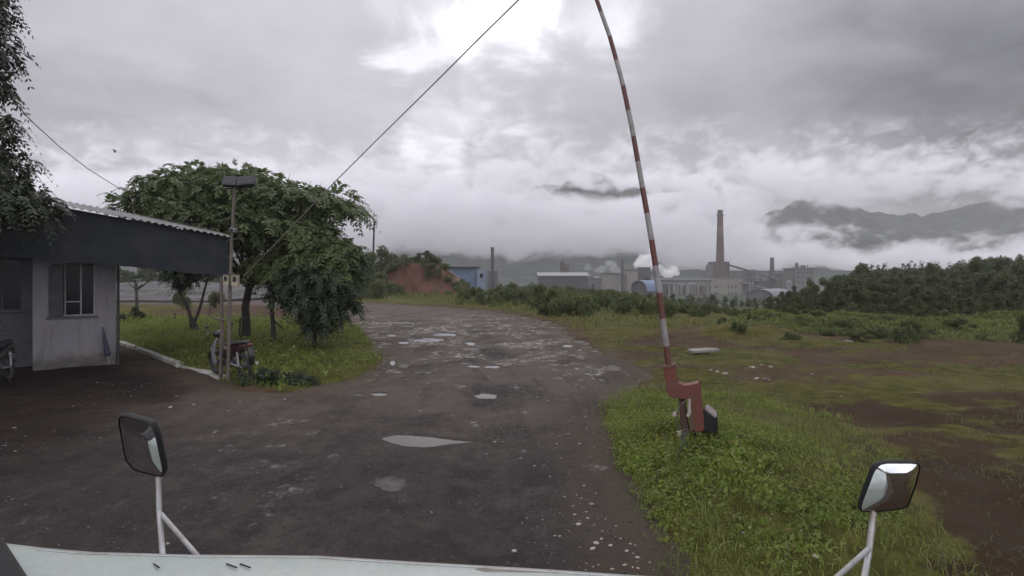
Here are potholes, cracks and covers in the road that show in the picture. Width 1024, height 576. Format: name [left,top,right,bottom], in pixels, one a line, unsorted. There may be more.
pothole [379,433,480,447]
pothole [373,476,408,491]
